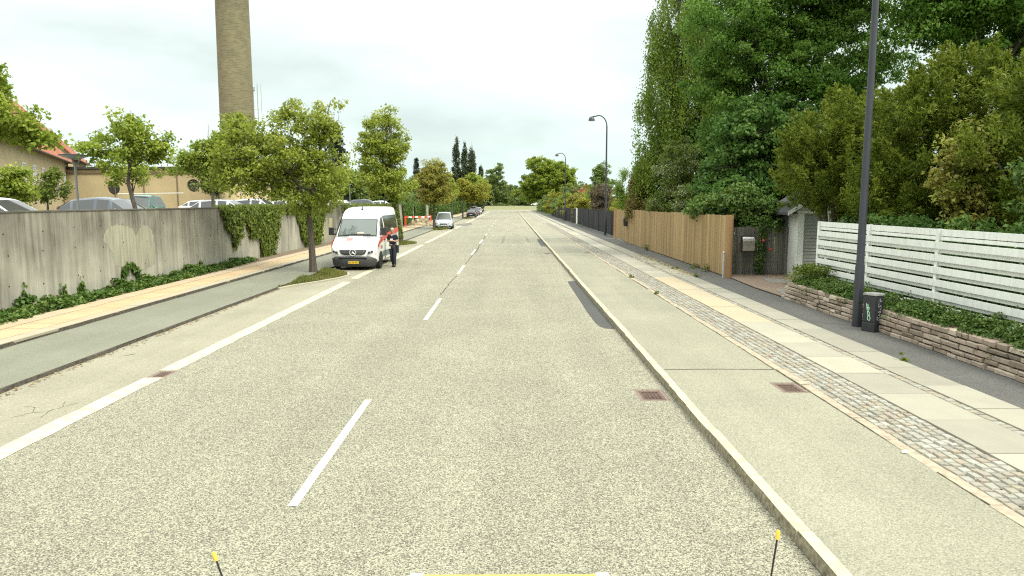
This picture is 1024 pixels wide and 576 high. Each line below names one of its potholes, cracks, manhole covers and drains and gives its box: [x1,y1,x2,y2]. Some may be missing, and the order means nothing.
drain grate [634,390,670,401]
drain grate [770,383,810,393]
